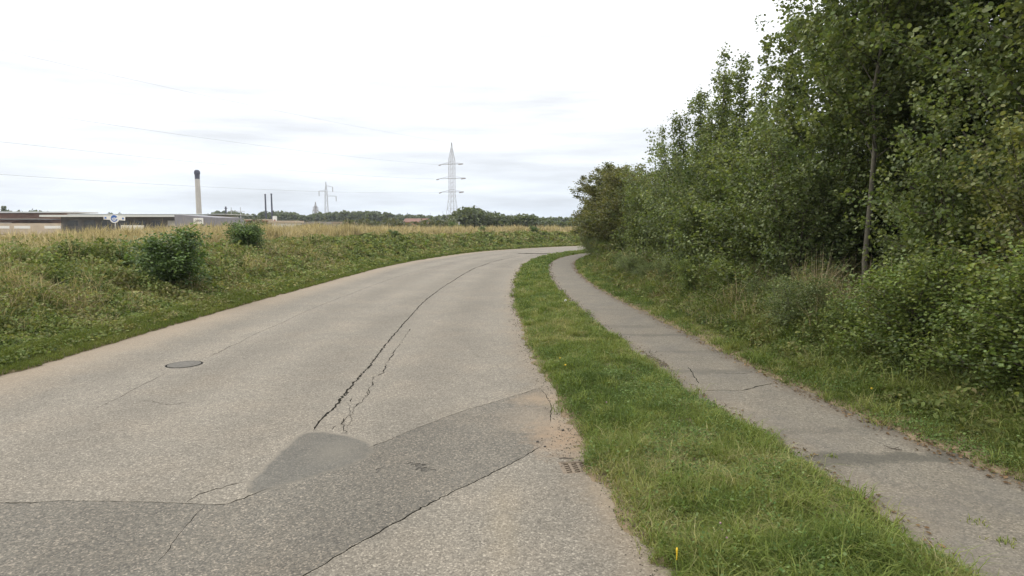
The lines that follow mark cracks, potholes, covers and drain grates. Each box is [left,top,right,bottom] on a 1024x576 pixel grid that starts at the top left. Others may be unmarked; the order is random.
crack [688,367,768,391]
crack [2,482,270,561]
drain grate [558,461,586,474]
crack [313,253,552,447]
